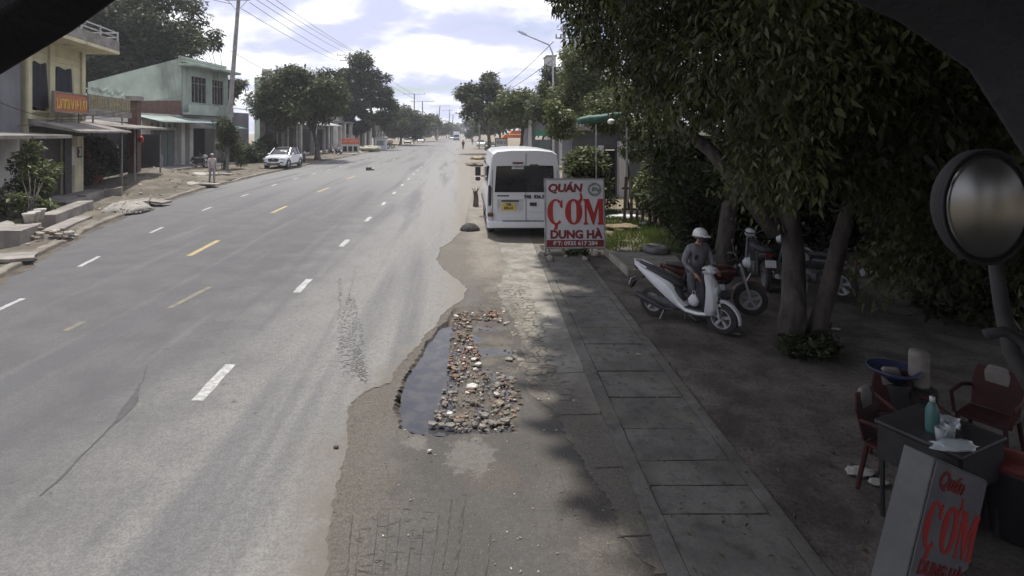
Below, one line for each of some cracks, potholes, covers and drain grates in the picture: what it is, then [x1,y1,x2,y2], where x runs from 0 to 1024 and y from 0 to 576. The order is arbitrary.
crack [336,267,368,383]
crack [346,494,491,576]
crack [504,268,584,415]
crack [39,365,148,496]
pothole [392,305,524,438]
